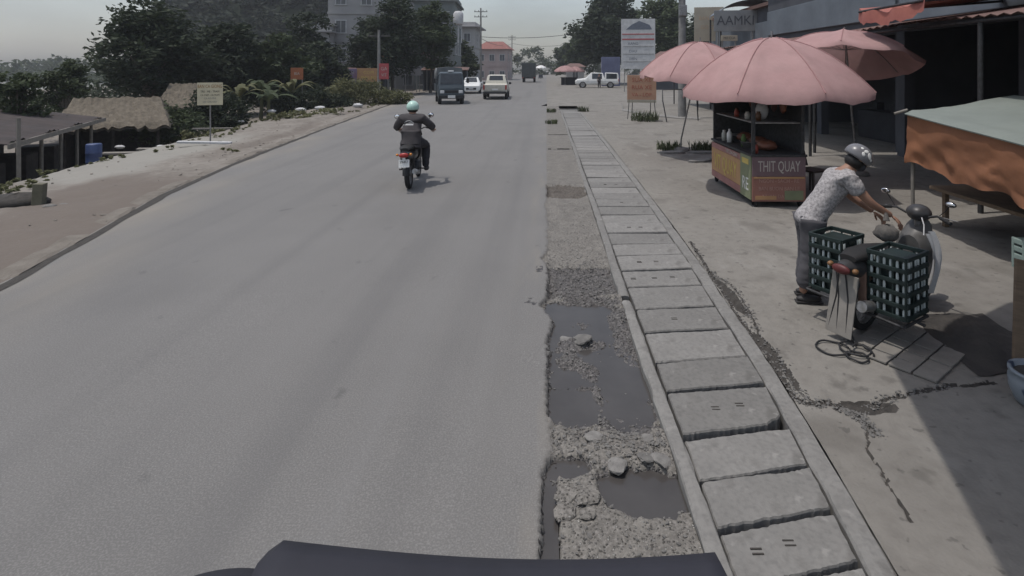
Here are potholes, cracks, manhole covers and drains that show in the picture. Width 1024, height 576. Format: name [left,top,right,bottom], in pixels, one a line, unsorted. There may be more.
pothole [544,296,661,452]
pothole [550,455,592,479]
pothole [538,464,562,559]
pothole [595,463,688,520]
